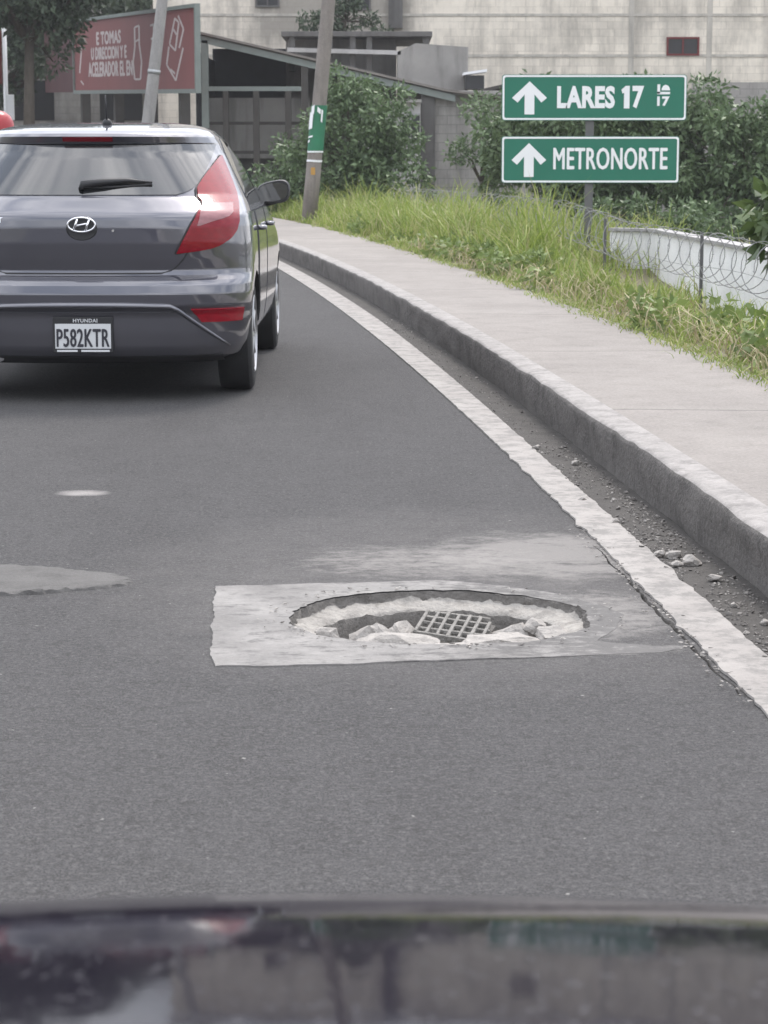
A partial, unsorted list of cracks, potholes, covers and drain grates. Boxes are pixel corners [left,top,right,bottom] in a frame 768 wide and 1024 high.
crack [595,547,739,695]
pothole [290,591,590,643]
